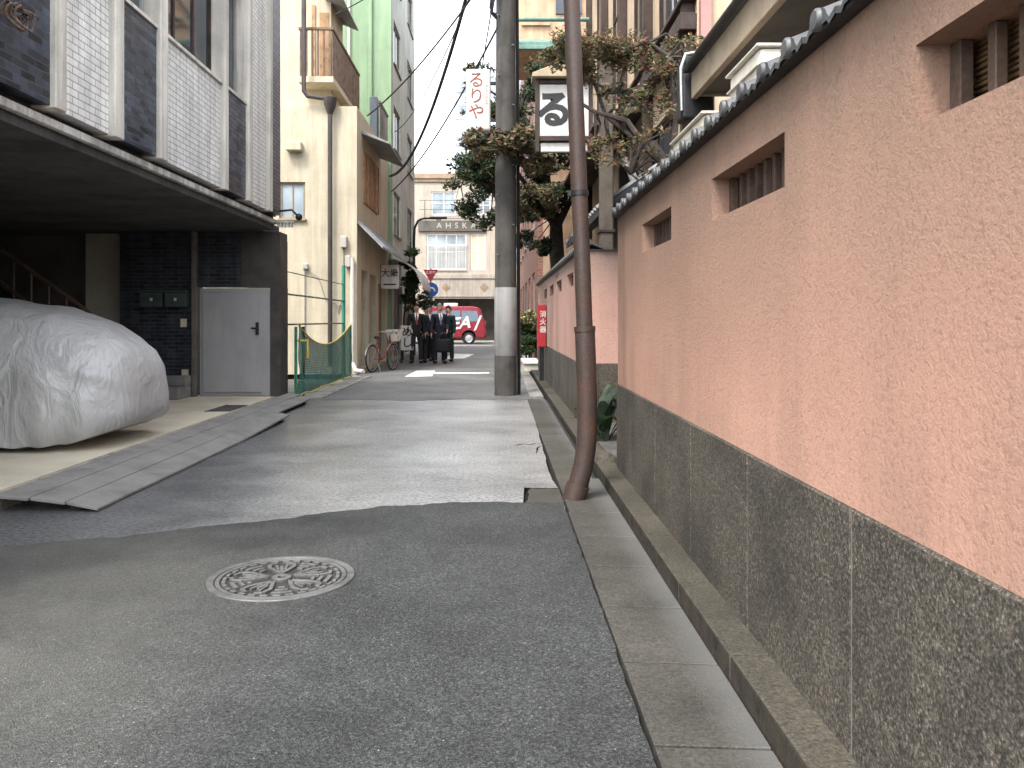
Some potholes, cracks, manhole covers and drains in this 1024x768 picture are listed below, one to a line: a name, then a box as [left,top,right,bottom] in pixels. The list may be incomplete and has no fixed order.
manhole cover [205,556,355,602]
